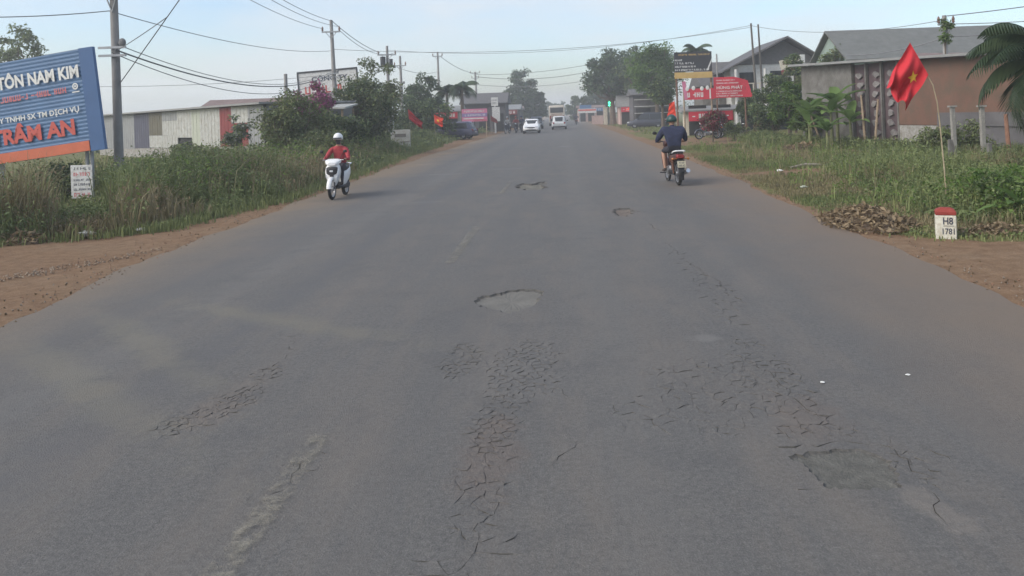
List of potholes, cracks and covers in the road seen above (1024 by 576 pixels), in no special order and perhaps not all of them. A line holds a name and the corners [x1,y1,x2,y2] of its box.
pothole [614,208,634,216]
crack [641,211,749,325]
pothole [474,289,544,313]
crack [613,336,950,522]
crack [408,340,568,576]
pothole [516,182,548,190]
crack [155,334,300,436]
